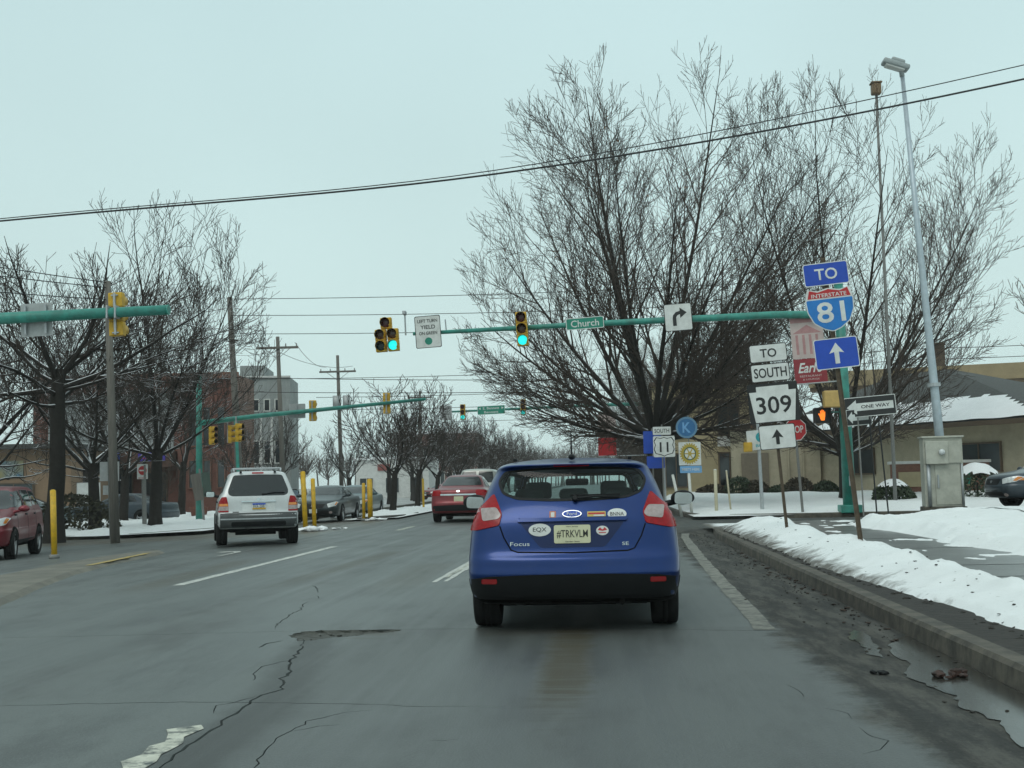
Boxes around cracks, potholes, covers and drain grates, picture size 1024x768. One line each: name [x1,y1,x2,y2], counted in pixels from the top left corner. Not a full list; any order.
pothole [289,629,400,641]
crack [7,586,470,768]
